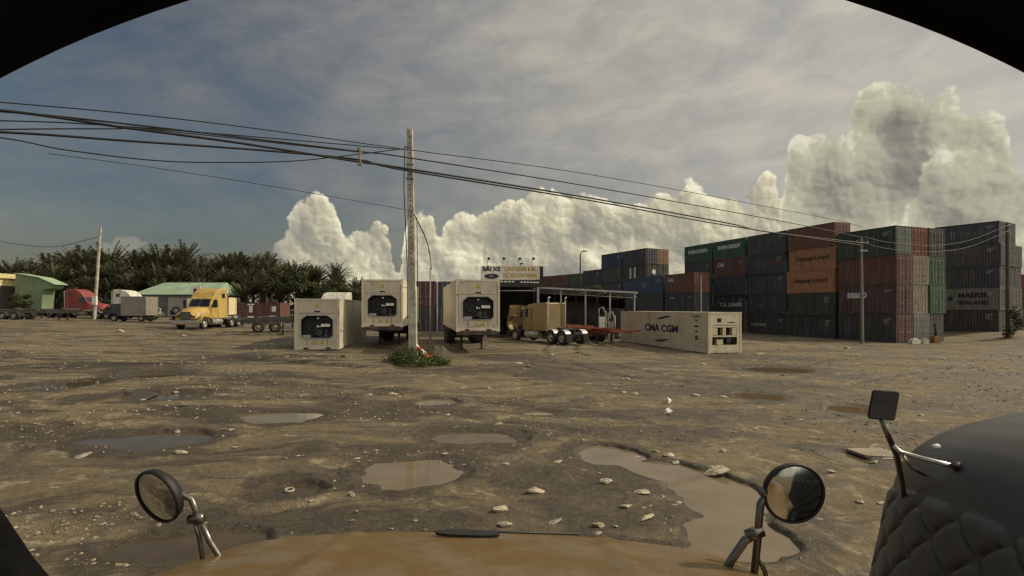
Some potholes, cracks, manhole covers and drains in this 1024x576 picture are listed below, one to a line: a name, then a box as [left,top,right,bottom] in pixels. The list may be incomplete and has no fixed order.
pothole [719,364,839,375]
pothole [35,424,251,458]
pothole [716,387,810,405]
pothole [343,435,873,576]
pothole [212,408,346,426]
pothole [391,424,553,449]
pothole [80,387,241,404]
pothole [803,399,914,421]
